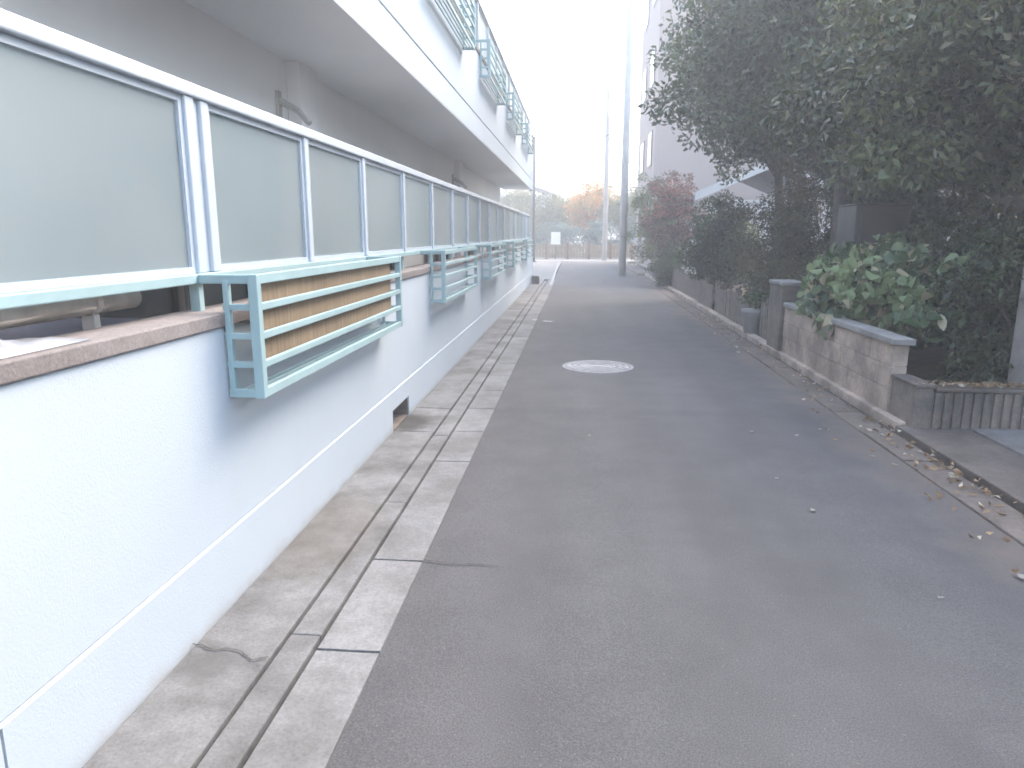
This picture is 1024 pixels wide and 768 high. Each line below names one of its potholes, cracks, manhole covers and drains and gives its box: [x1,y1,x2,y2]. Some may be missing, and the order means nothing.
manhole cover [562,360,634,373]
crack [193,643,268,660]
crack [423,559,500,567]
